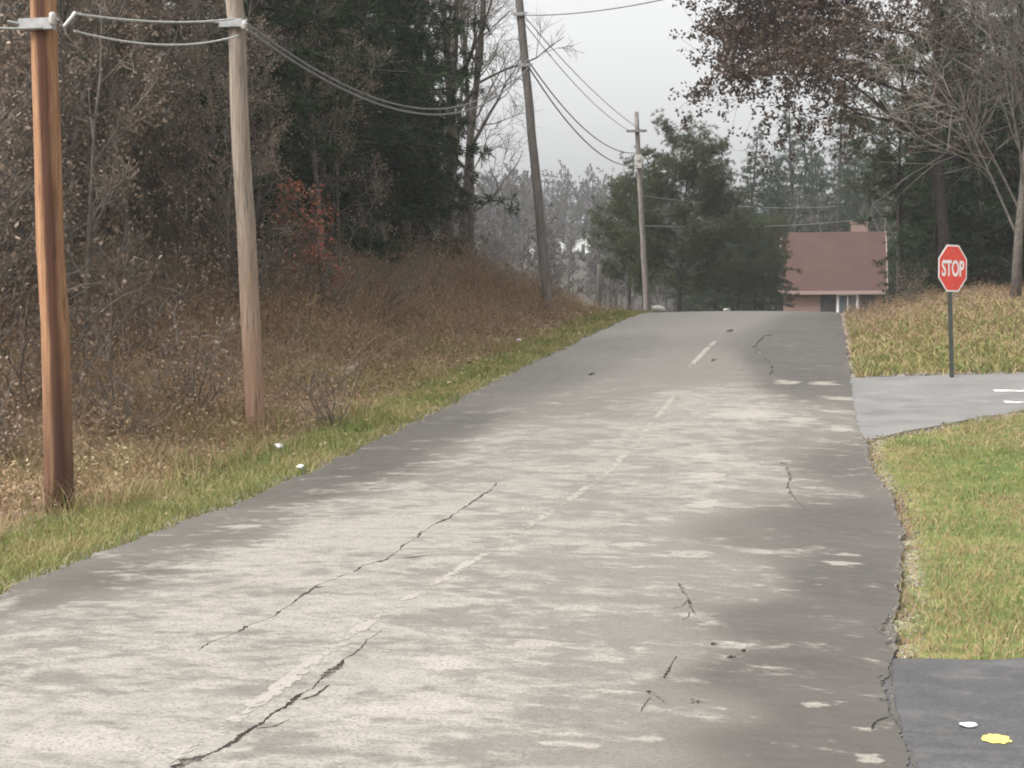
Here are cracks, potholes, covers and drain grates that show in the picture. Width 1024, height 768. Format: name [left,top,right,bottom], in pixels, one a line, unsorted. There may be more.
crack [871,617,910,766]
crack [171,636,374,768]
crack [754,335,774,374]
crack [641,657,676,712]
crack [201,483,497,648]
crack [782,463,806,510]
crack [679,584,696,617]
